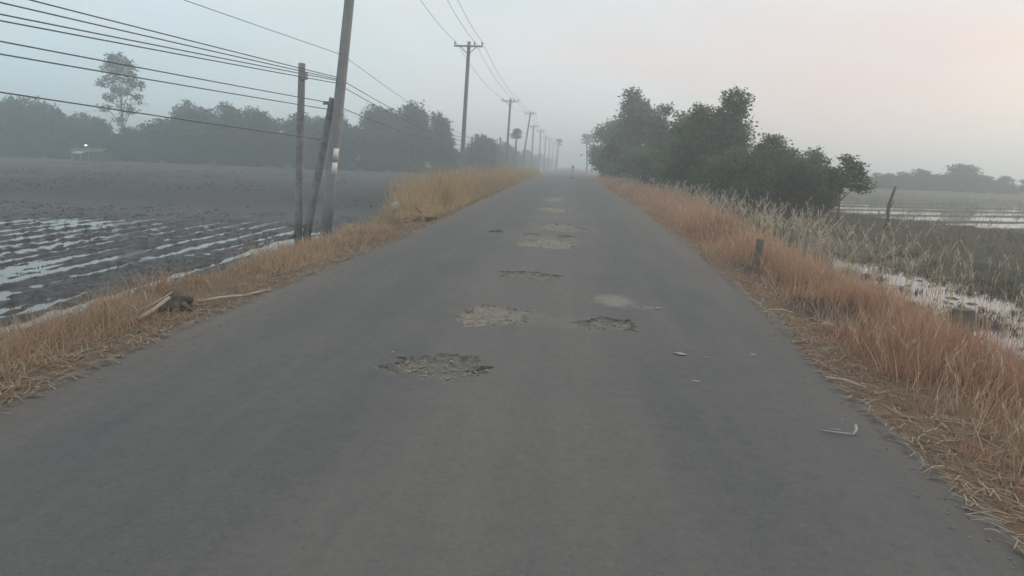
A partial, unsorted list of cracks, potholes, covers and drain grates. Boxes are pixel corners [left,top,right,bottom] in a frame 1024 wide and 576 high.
pothole [515,239,595,249]
pothole [537,223,593,233]
pothole [374,351,494,384]
pothole [566,314,639,332]
pothole [439,303,536,329]
pothole [497,269,563,282]
